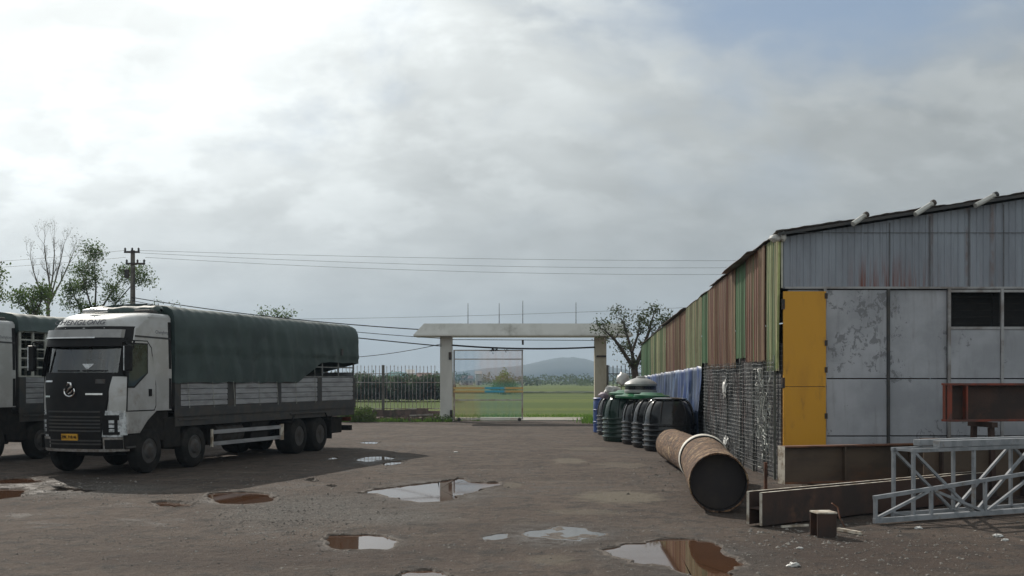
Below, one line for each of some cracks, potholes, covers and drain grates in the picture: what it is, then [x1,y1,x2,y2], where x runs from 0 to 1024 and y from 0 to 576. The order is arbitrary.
pothole [0,476,49,484]
pothole [595,537,752,576]
pothole [320,533,404,551]
pothole [352,477,504,503]
pothole [201,490,280,505]
pothole [147,499,203,508]
pothole [0,488,30,500]
